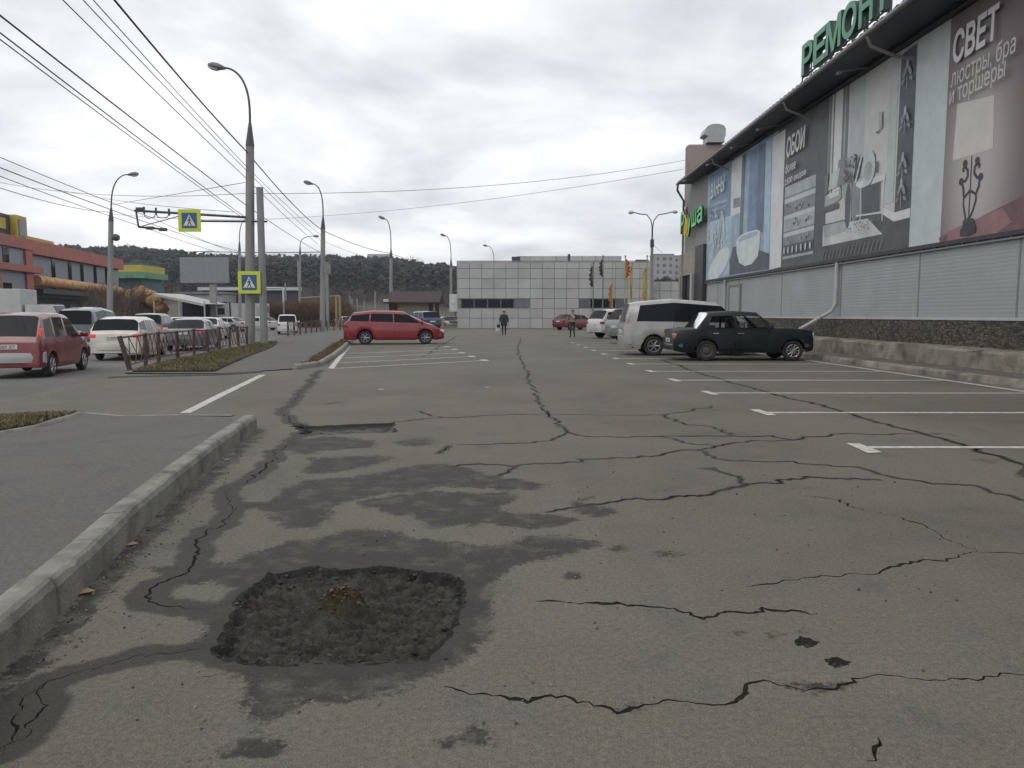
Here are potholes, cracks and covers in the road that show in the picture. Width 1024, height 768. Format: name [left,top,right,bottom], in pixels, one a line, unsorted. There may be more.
pothole [794,636,820,648]
pothole [210,566,467,667]
pothole [290,423,398,437]
crack [871,738,883,761]
crack [551,472,840,512]
crack [445,673,1019,715]
crack [409,349,1018,499]
crack [0,644,221,750]
crack [144,371,320,611]
crack [538,496,1018,620]
pothole [825,657,851,668]
